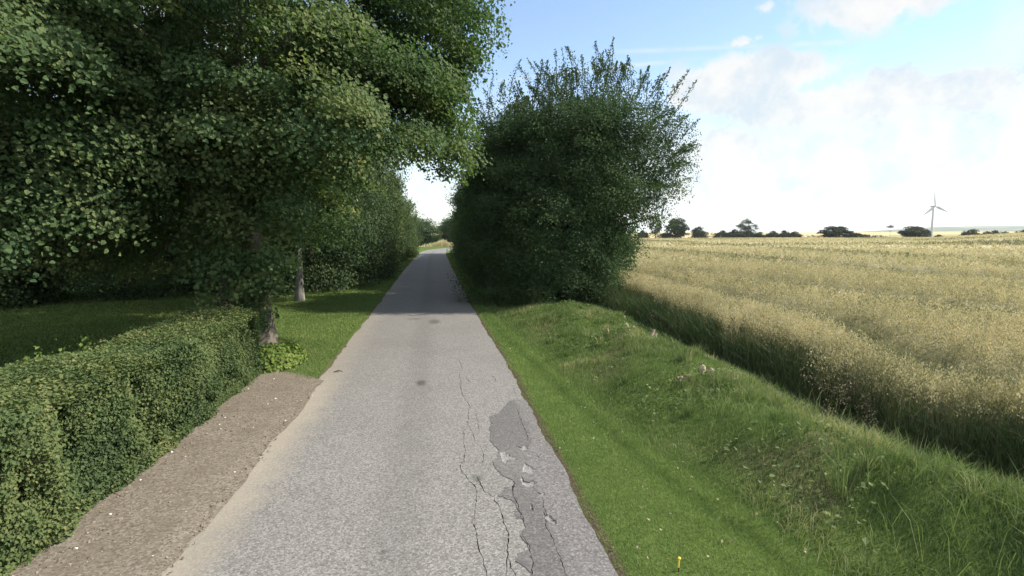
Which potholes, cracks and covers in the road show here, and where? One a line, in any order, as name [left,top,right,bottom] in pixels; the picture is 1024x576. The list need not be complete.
crack [459,361,566,576]
pothole [500,452,516,464]
